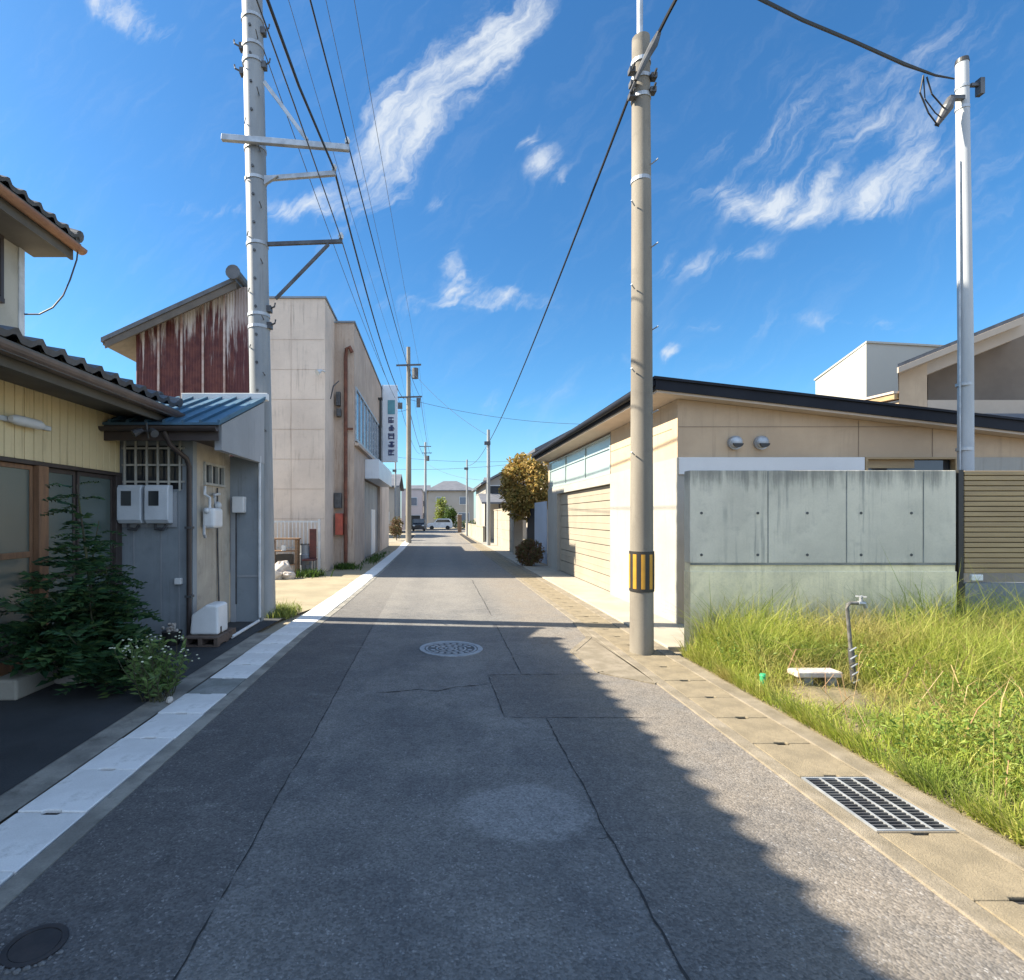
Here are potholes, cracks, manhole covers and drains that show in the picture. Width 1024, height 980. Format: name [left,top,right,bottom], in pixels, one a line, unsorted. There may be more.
manhole cover [420,641,483,657]
manhole cover [0,923,69,975]
crack [379,674,644,718]
drain grate [800,777,959,835]
